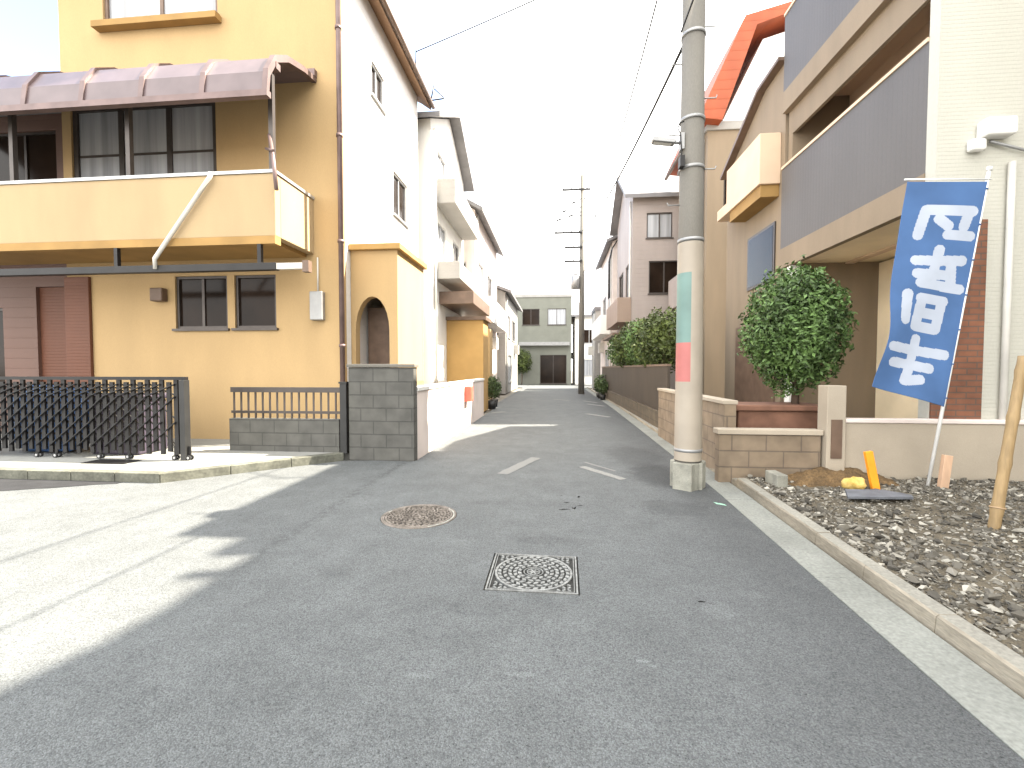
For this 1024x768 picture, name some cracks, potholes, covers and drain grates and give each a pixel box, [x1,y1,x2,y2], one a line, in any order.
manhole cover [485,553,580,595]
manhole cover [381,504,457,529]
